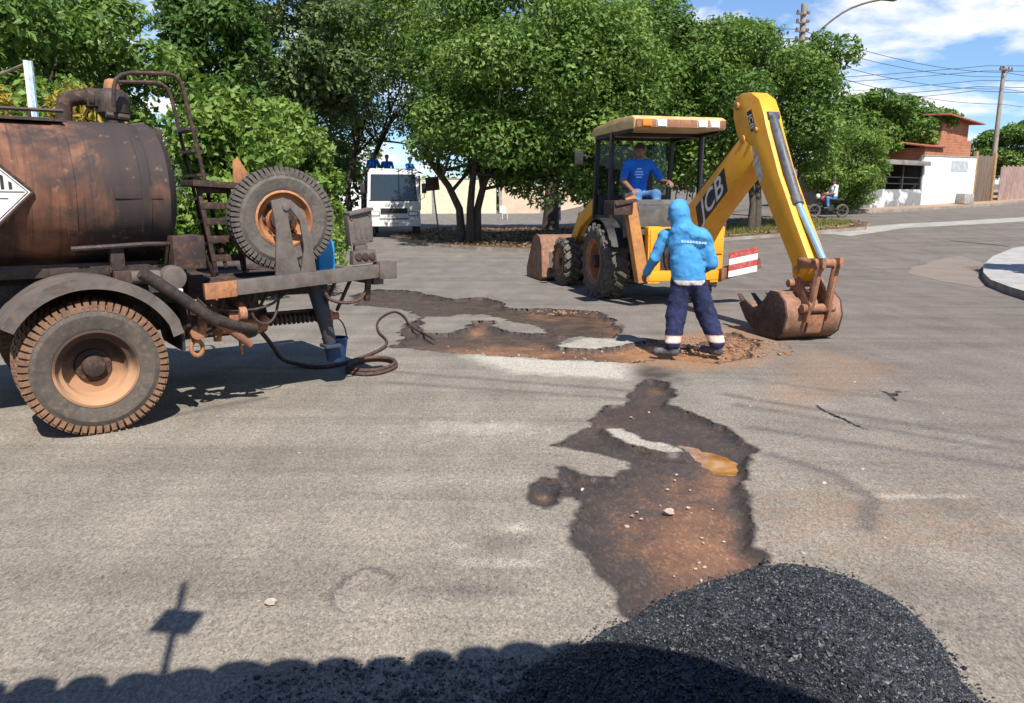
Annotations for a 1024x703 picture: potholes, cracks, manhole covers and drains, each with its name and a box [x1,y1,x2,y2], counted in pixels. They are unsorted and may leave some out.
pothole [552,379,768,619]
crack [816,405,868,430]
pothole [351,289,759,364]
pothole [528,478,562,506]
crack [878,390,907,401]
